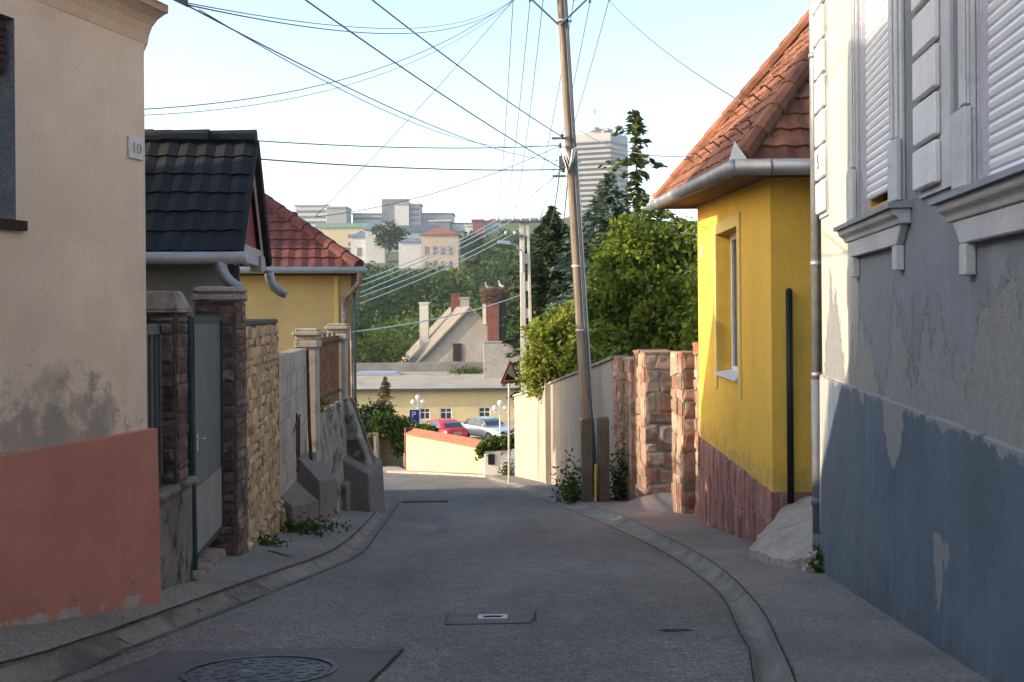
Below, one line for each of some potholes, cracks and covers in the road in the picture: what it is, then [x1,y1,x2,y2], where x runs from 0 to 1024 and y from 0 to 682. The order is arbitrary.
manhole cover [179,655,338,682]
